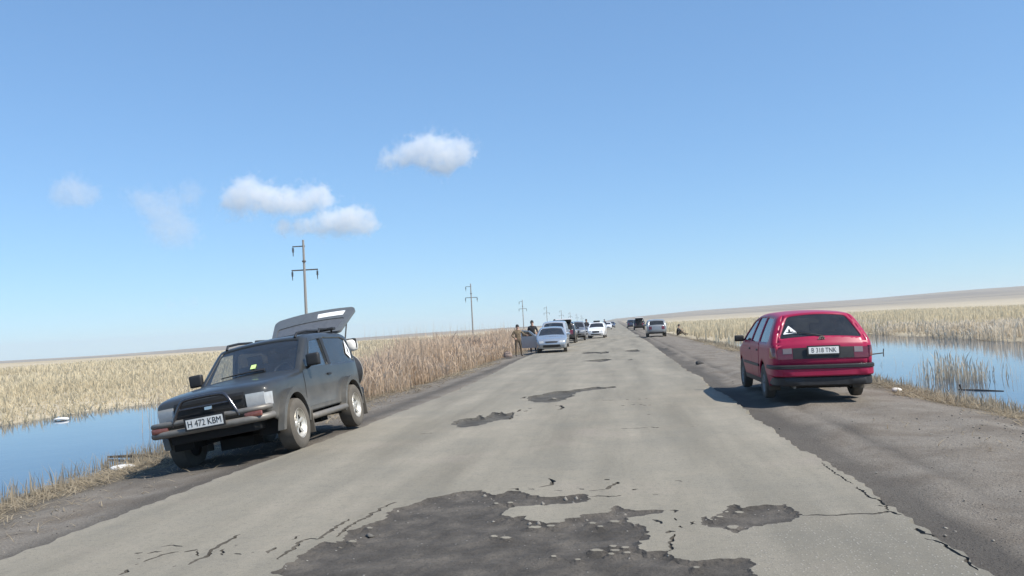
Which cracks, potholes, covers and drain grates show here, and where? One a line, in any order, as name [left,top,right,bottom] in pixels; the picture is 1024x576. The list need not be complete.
crack [799,462,978,570]
pothole [527,386,616,403]
pothole [271,490,758,576]
pothole [701,504,803,533]
crack [119,502,396,575]
pothole [451,411,514,428]
